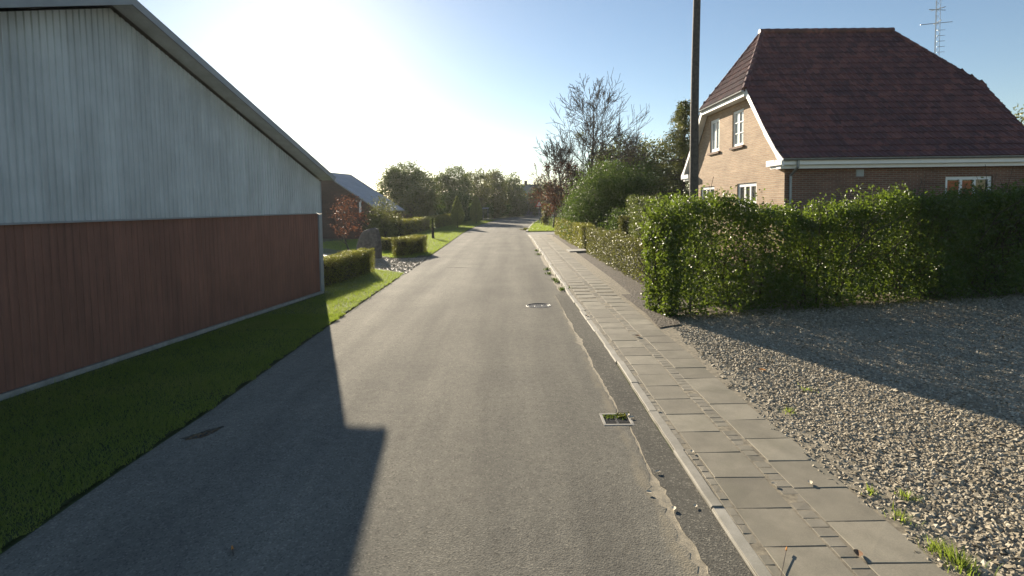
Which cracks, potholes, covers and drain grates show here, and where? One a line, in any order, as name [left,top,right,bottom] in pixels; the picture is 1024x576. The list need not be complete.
drain grate [599,412,635,427]
pothole [180,426,224,440]
